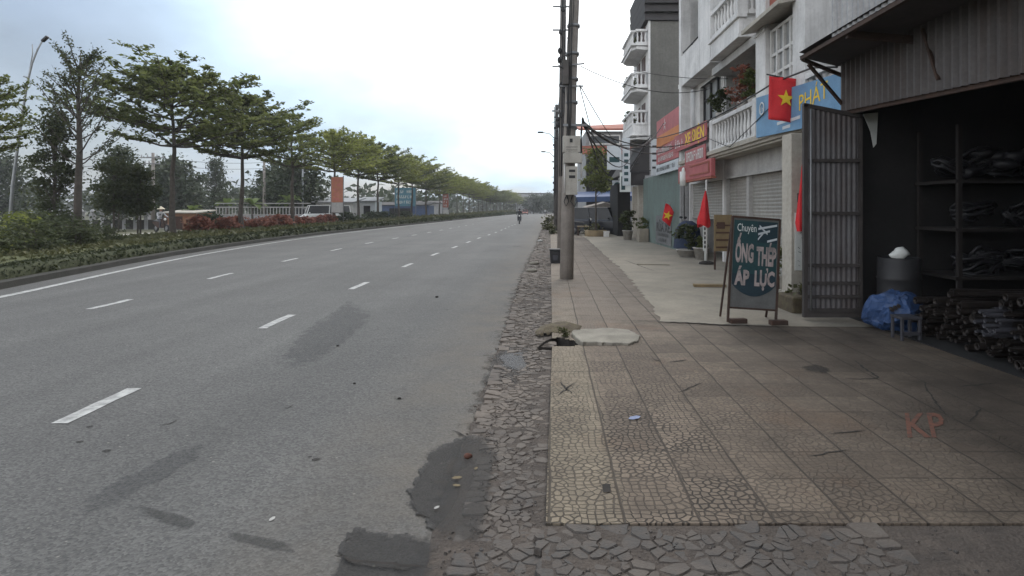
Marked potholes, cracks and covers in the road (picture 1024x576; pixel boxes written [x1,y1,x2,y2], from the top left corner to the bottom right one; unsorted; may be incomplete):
crack [845,360,879,379]
crack [924,383,993,415]
crack [811,430,864,456]
